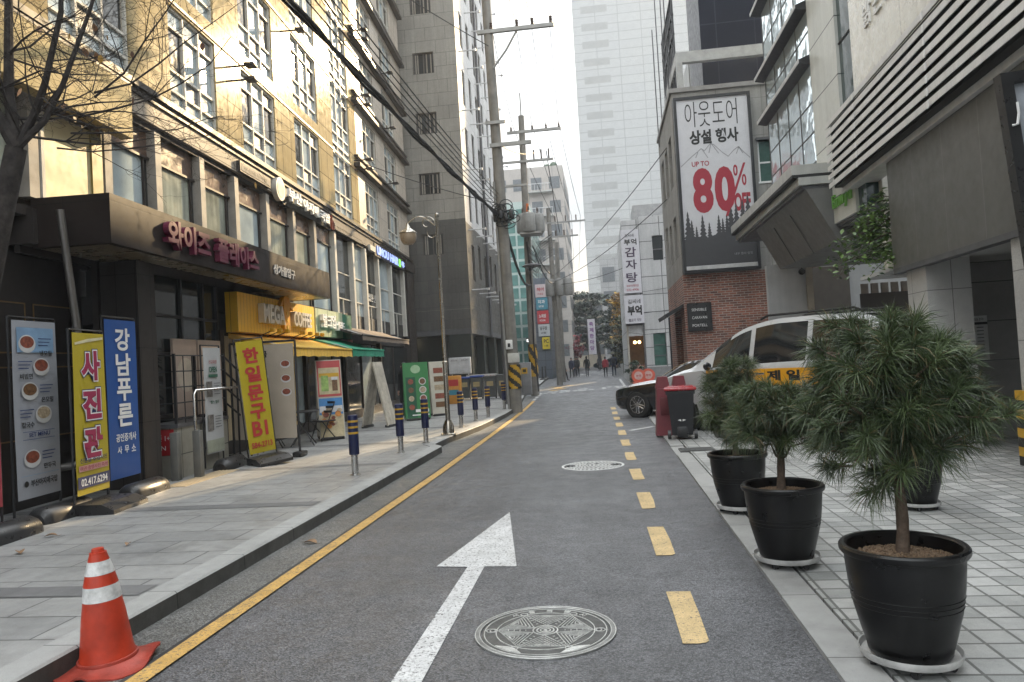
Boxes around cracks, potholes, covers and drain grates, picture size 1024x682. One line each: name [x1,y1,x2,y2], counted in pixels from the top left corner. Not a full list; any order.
manhole cover [562,461,624,471]
manhole cover [475,606,617,661]
